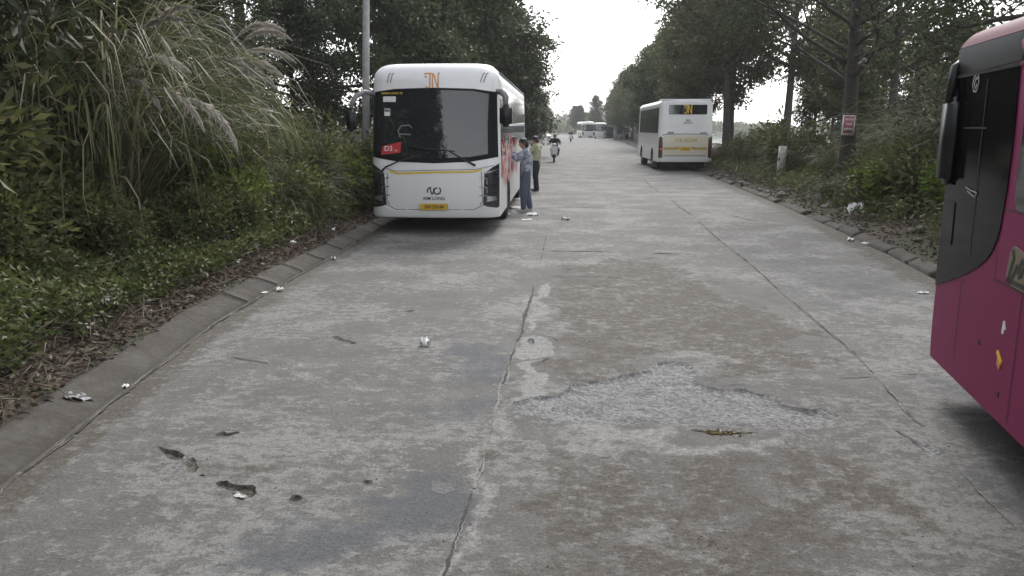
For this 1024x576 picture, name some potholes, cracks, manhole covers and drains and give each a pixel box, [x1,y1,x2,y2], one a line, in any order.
pothole [215,480,257,497]
crack [442,286,558,576]
pothole [157,446,185,460]
pothole [510,361,841,429]
pothole [186,457,199,473]
